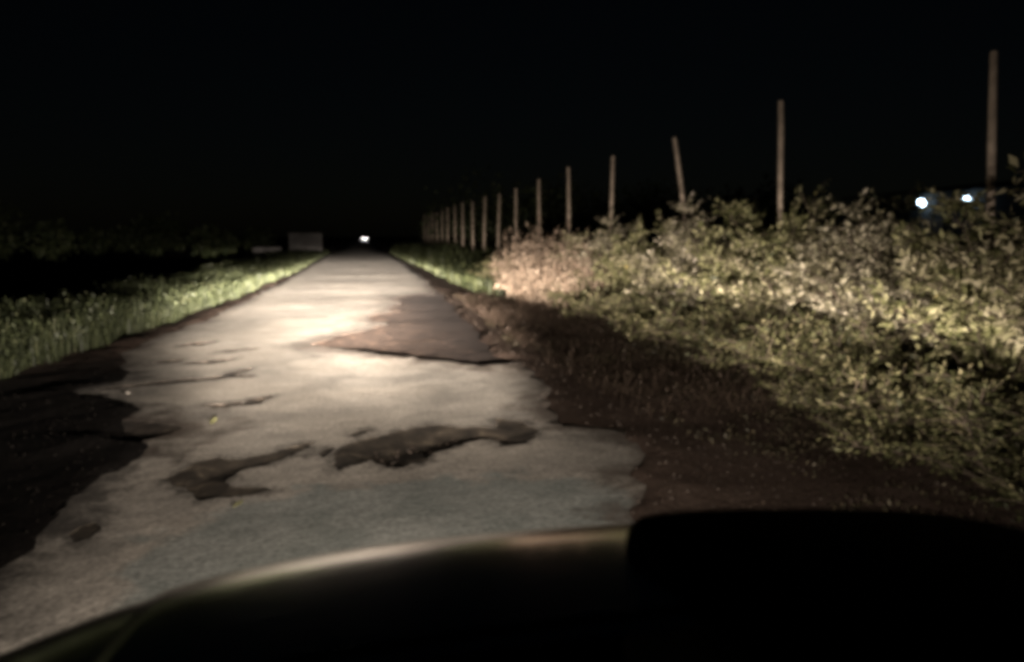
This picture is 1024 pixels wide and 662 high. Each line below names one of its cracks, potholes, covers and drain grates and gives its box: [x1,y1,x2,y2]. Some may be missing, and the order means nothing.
crack [95,341,273,408]
pothole [162,442,314,501]
pothole [68,522,102,543]
pothole [332,418,542,470]
pothole [311,290,512,366]
